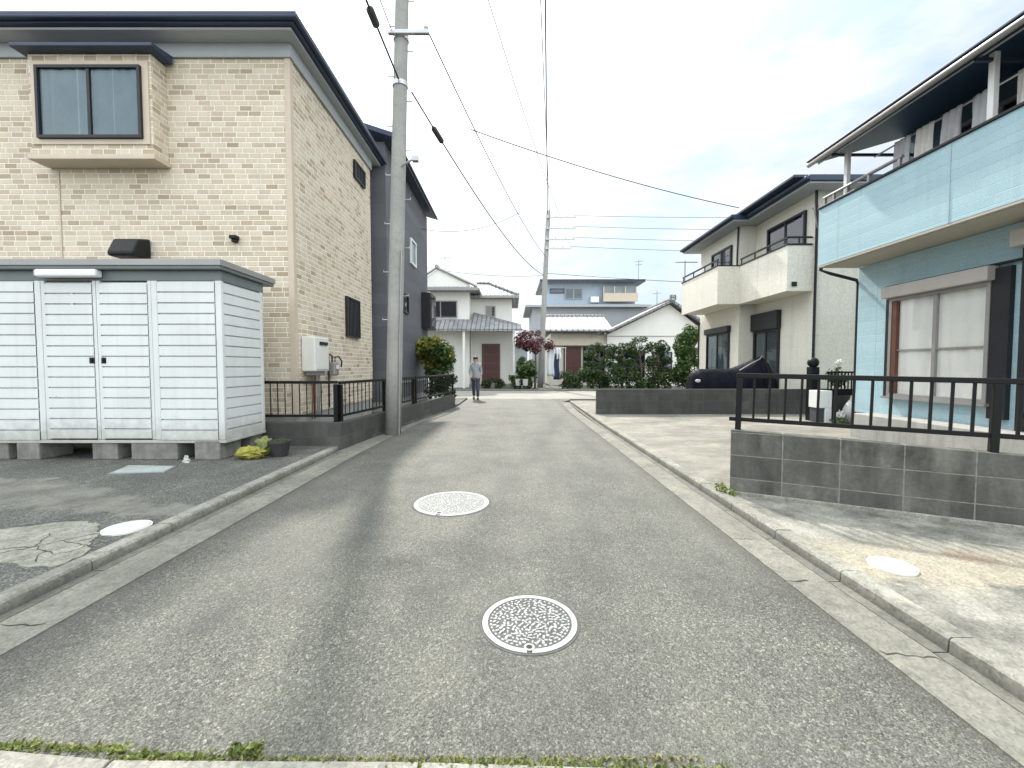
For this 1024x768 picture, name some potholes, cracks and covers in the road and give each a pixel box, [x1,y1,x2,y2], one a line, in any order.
manhole cover [412,491,491,517]
manhole cover [480,594,580,656]
utility cover [108,465,177,474]
crack [2,519,109,562]
